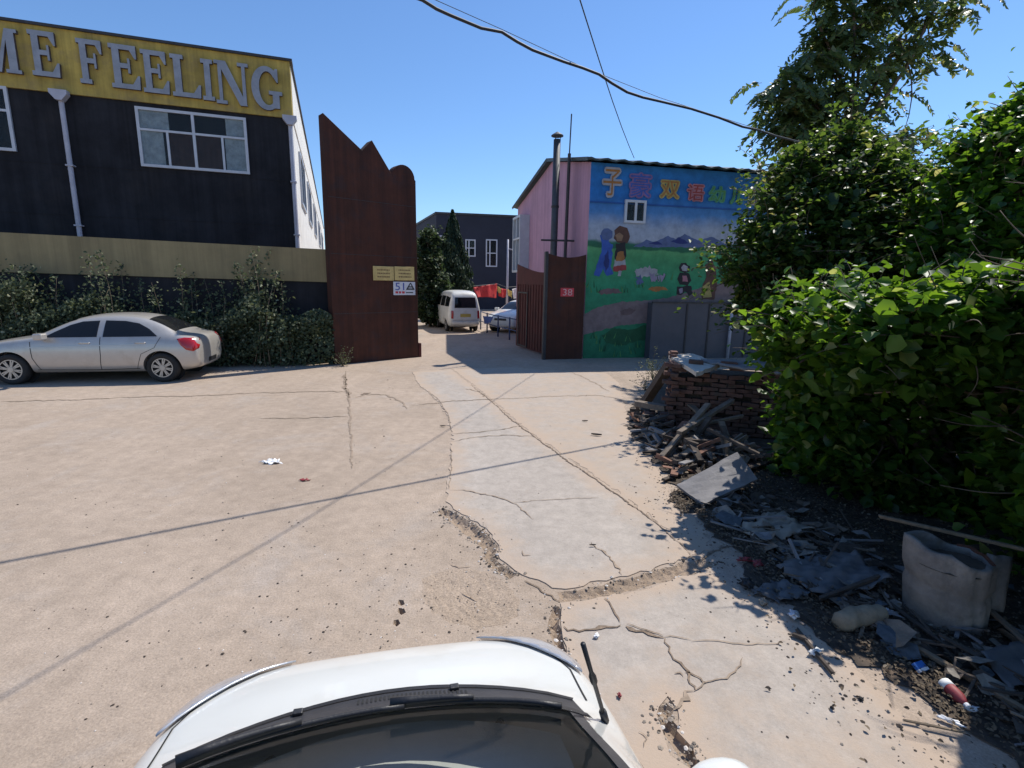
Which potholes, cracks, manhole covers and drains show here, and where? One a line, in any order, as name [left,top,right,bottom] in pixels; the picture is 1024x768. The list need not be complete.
crack [590,543,622,574]
crack [564,598,779,710]
pothole [657,705,696,768]
crack [129,371,630,516]
